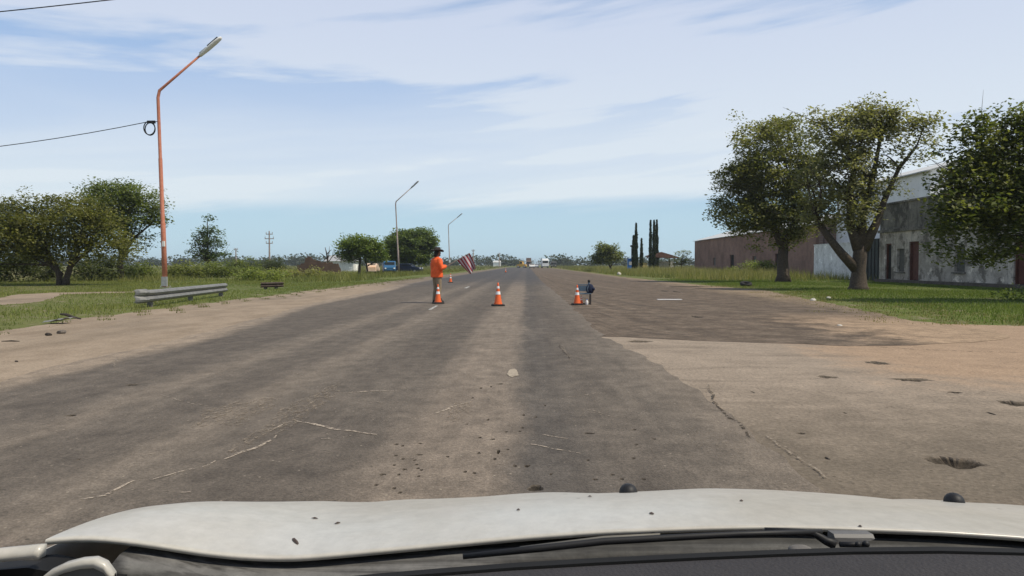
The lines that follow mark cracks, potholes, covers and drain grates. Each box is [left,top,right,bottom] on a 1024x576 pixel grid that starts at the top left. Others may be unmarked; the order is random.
crack [84,453,152,499]
crack [154,421,373,492]
pothole [921,456,990,469]
